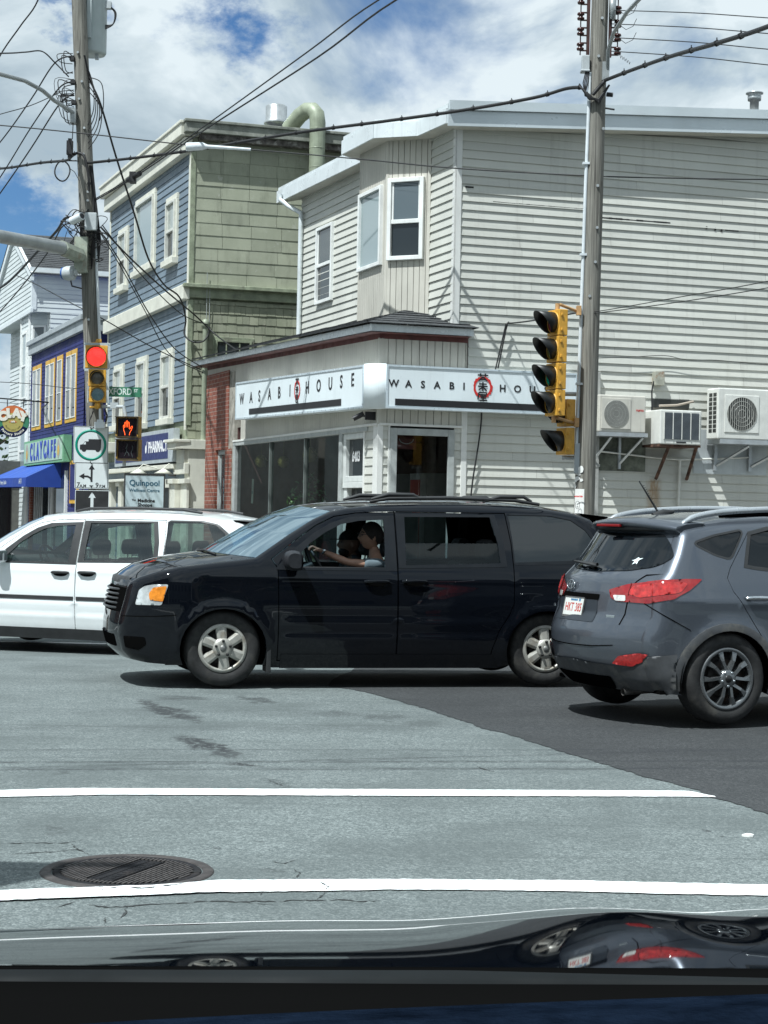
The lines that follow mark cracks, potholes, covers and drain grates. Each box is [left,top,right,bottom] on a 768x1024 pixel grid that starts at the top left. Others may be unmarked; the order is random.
manhole cover [39,854,214,887]
crack [0,839,88,854]
crack [87,881,378,922]
